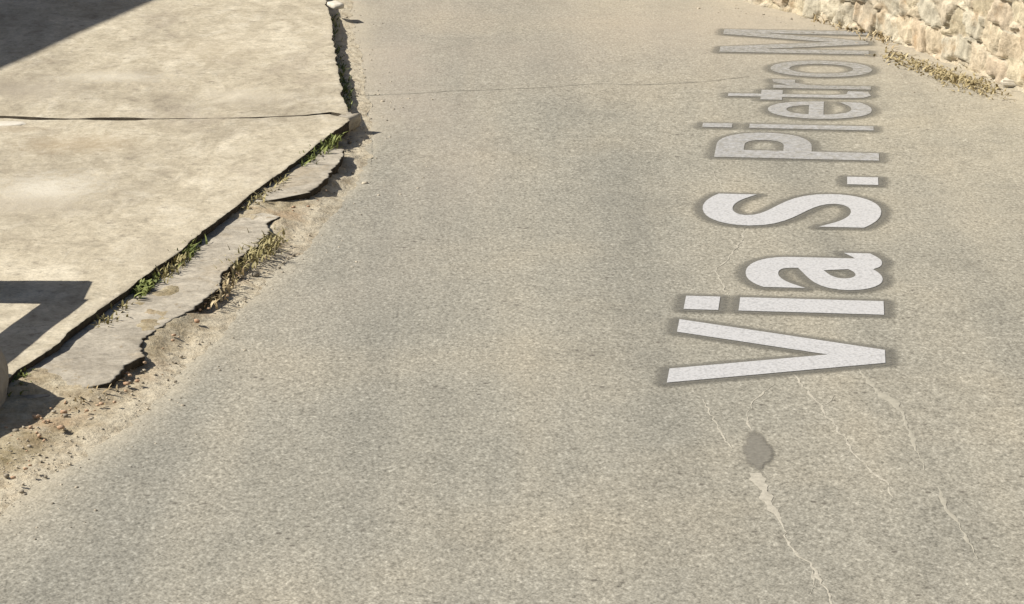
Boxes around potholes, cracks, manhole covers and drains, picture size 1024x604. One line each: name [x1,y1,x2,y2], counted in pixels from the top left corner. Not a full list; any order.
crack [793,368,978,559]
crack [714,175,746,296]
crack [702,385,833,604]
